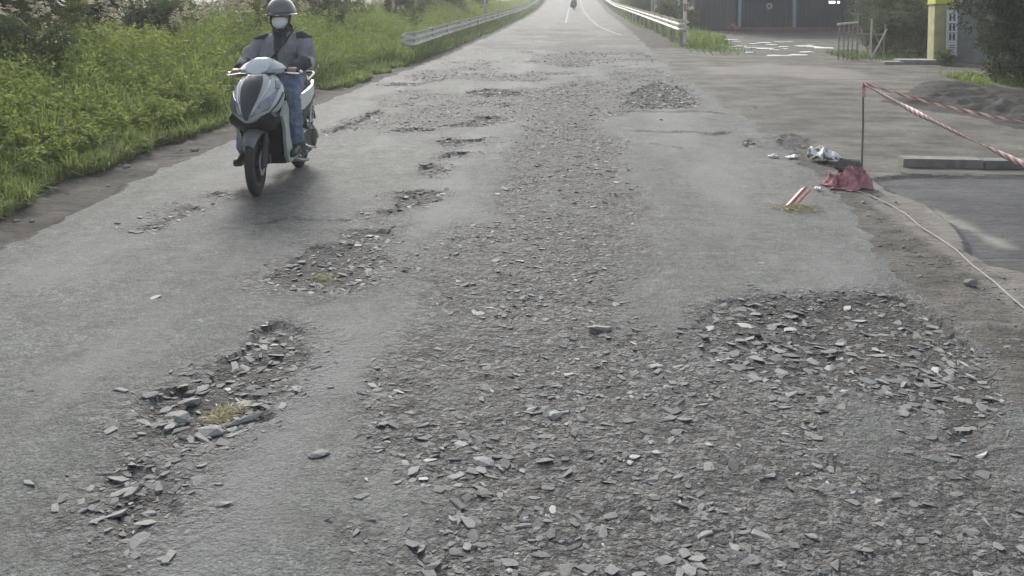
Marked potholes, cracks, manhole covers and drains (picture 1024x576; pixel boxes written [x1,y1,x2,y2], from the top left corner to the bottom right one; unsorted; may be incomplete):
pothole [416,164,447,178]
pothole [435,136,491,148]
crack [613,110,731,149]
pothole [390,189,451,209]
pothole [137,203,205,231]
pothole [445,116,507,128]
pothole [123,321,314,448]
pothole [258,227,395,295]
pothole [621,79,700,109]
pothole [689,290,1009,450]
